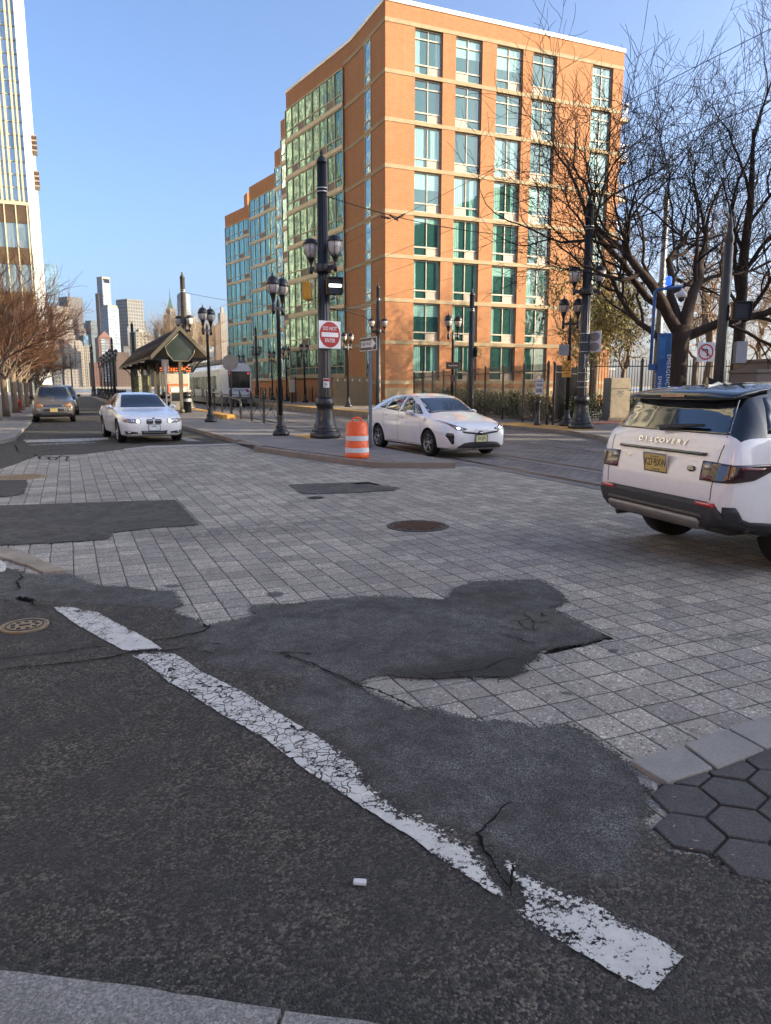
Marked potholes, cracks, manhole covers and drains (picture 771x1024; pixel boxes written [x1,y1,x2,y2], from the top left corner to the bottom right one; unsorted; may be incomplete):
manhole cover [387,520,448,532]
manhole cover [0,618,50,634]
crack [2,574,49,606]
crack [268,612,547,716]
crack [475,801,515,899]
crack [0,623,219,669]
